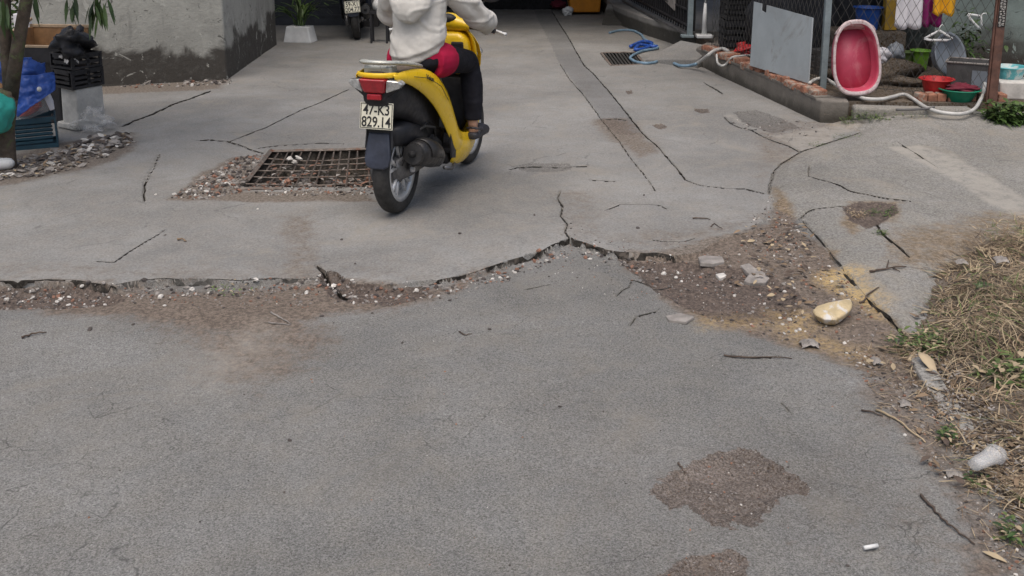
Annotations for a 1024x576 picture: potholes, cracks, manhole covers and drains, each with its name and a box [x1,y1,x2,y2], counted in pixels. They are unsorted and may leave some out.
crack [724,117,911,219]
crack [618,280,672,326]
drain grate [601,51,644,66]
crack [196,139,342,154]
crack [876,224,910,258]
crack [509,166,615,182]
crack [429,191,695,286]
drain grate [240,147,373,190]
pothole [842,201,899,229]
crack [97,230,165,263]
crack [0,266,348,301]
pothole [617,259,801,325]
